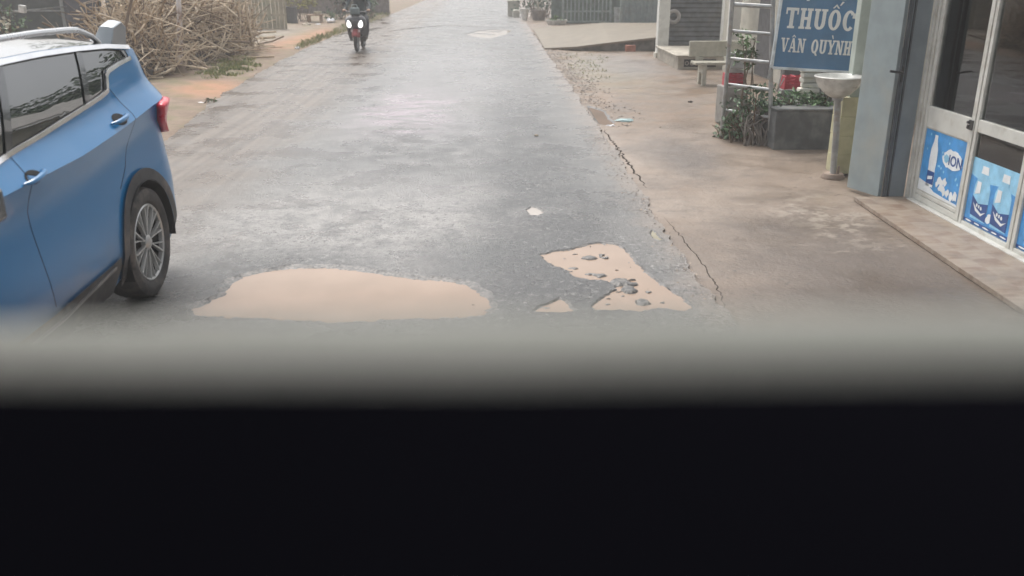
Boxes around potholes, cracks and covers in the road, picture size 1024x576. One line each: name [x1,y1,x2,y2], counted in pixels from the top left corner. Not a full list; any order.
crack [665,218,725,306]
pothole [186,264,498,316]
pothole [533,296,579,312]
pothole [539,242,694,311]
